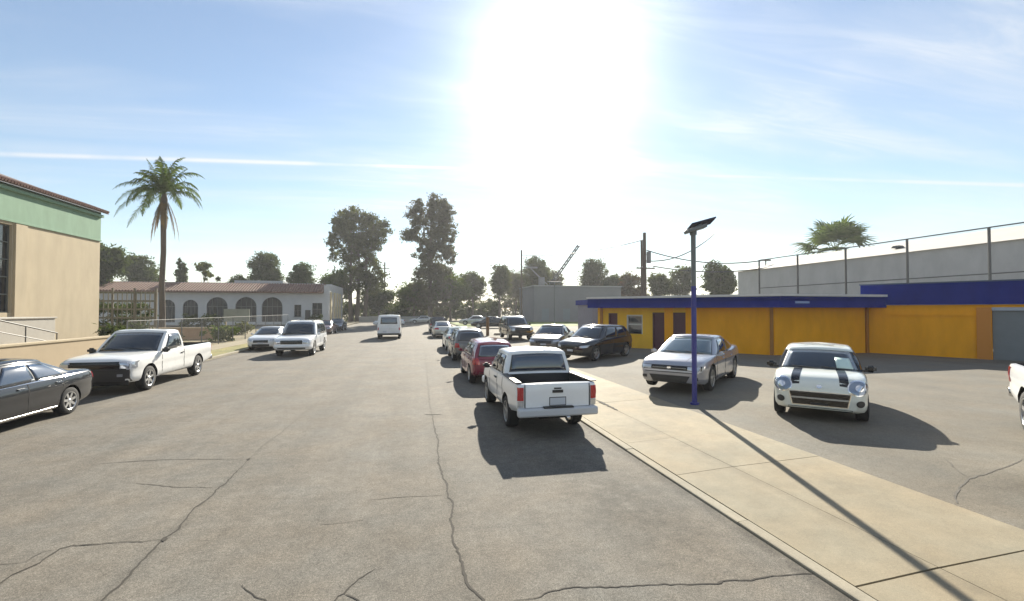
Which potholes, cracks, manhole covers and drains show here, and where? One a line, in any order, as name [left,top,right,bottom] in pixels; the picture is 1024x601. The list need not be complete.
crack [944,458,1022,503]
crack [367,351,485,601]
crack [334,570,373,601]
crack [514,573,813,601]
crack [0,405,312,601]
